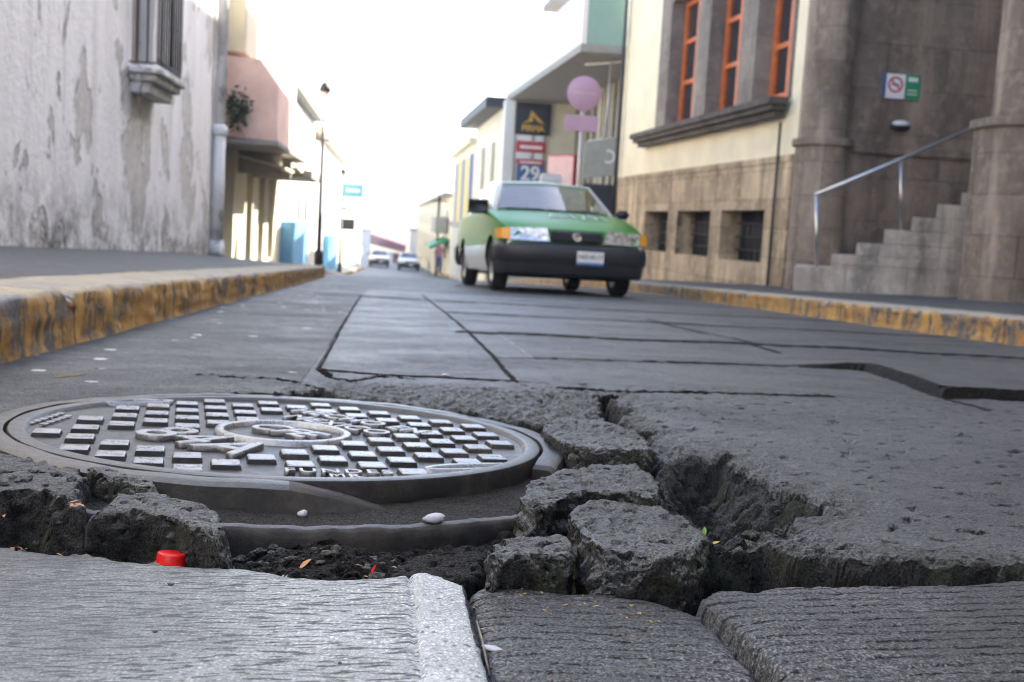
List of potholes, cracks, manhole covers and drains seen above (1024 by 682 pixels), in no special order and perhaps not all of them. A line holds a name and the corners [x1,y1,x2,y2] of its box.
crack [594,394,617,415]
pothole [0,388,1024,617]
manhole cover [0,393,564,558]
